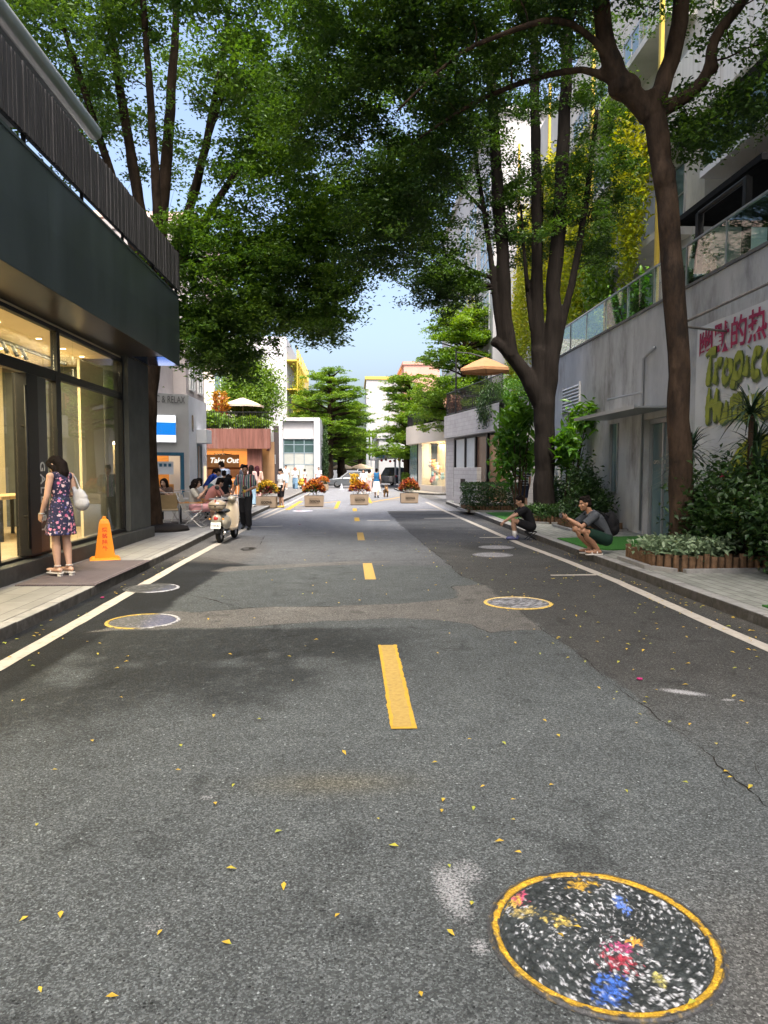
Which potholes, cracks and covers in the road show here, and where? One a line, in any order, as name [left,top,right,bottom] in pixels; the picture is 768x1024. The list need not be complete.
manhole cover [104,613,181,629]
manhole cover [484,597,553,610]
manhole cover [487,871,730,1024]
manhole cover [122,584,180,593]
